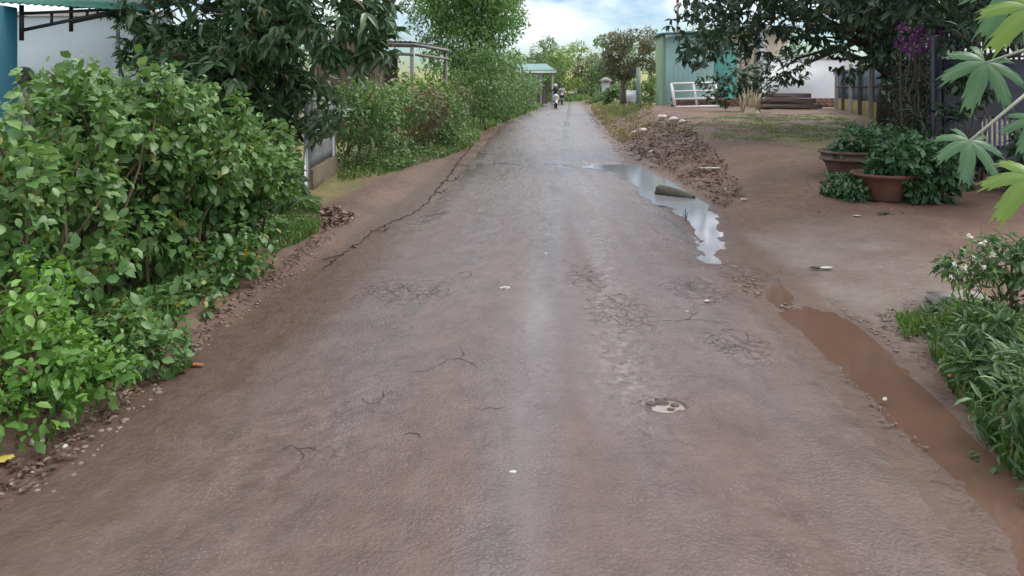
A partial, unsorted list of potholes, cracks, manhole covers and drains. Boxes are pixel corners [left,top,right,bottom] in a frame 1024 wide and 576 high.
crack [322,144,568,269]
crack [350,271,472,303]
crack [561,258,782,359]
